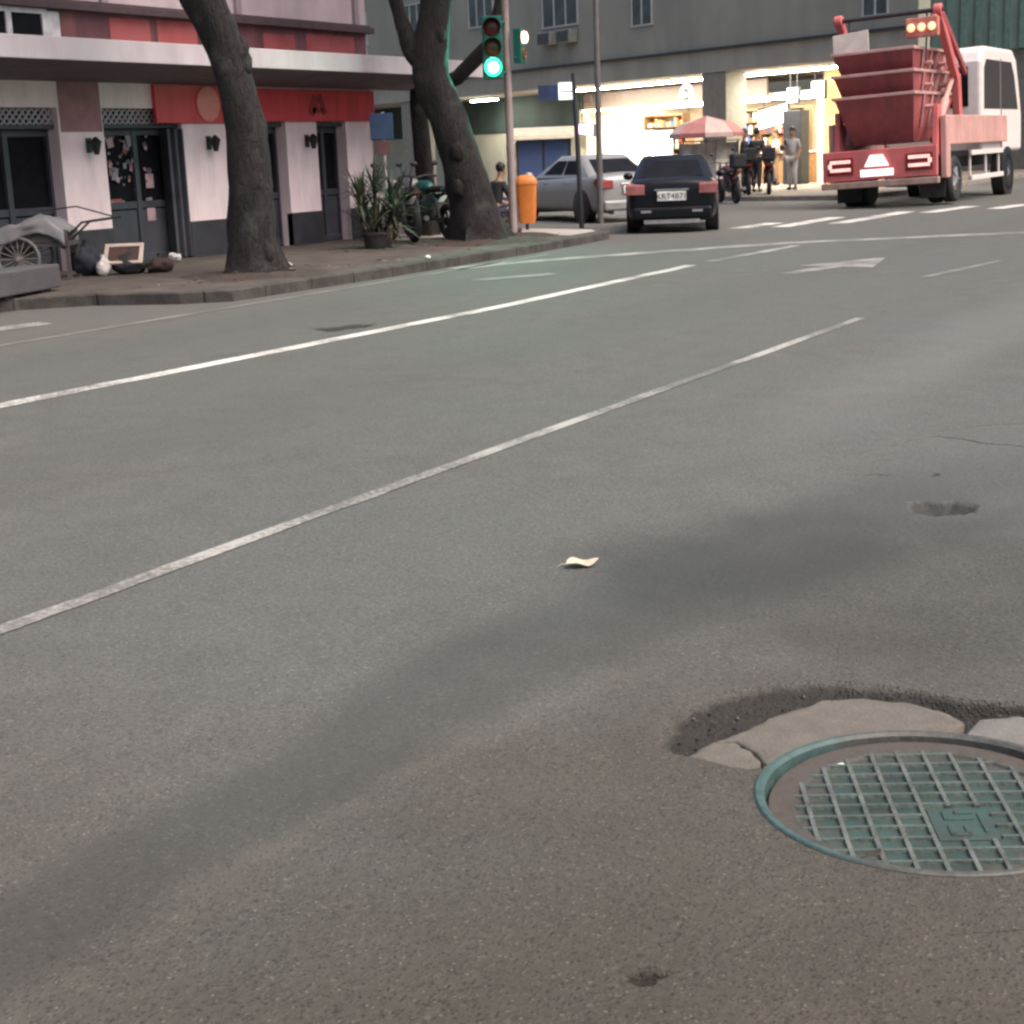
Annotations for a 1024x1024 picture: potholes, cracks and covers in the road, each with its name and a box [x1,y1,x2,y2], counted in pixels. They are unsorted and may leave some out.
pothole [621,966,676,987]
pothole [654,680,1024,769]
crack [849,424,1024,477]
manhole cover [754,730,1024,878]
pothole [307,322,378,332]
pothole [905,500,981,517]
